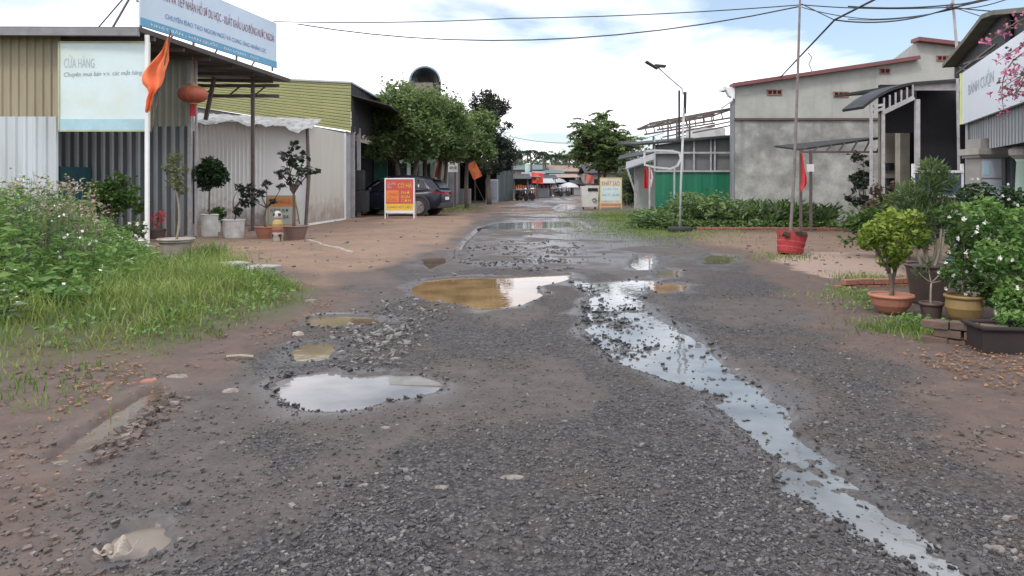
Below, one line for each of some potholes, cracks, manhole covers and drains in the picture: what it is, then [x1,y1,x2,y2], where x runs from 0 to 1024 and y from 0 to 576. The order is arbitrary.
pothole [622,254,660,270]
pothole [257,366,455,413]
pothole [474,220,586,230]
pothole [89,511,193,568]
pothole [563,277,1013,576]
pothole [408,253,456,272]
pothole [403,272,577,310]
pothole [295,312,397,328]
pothole [278,339,349,363]
